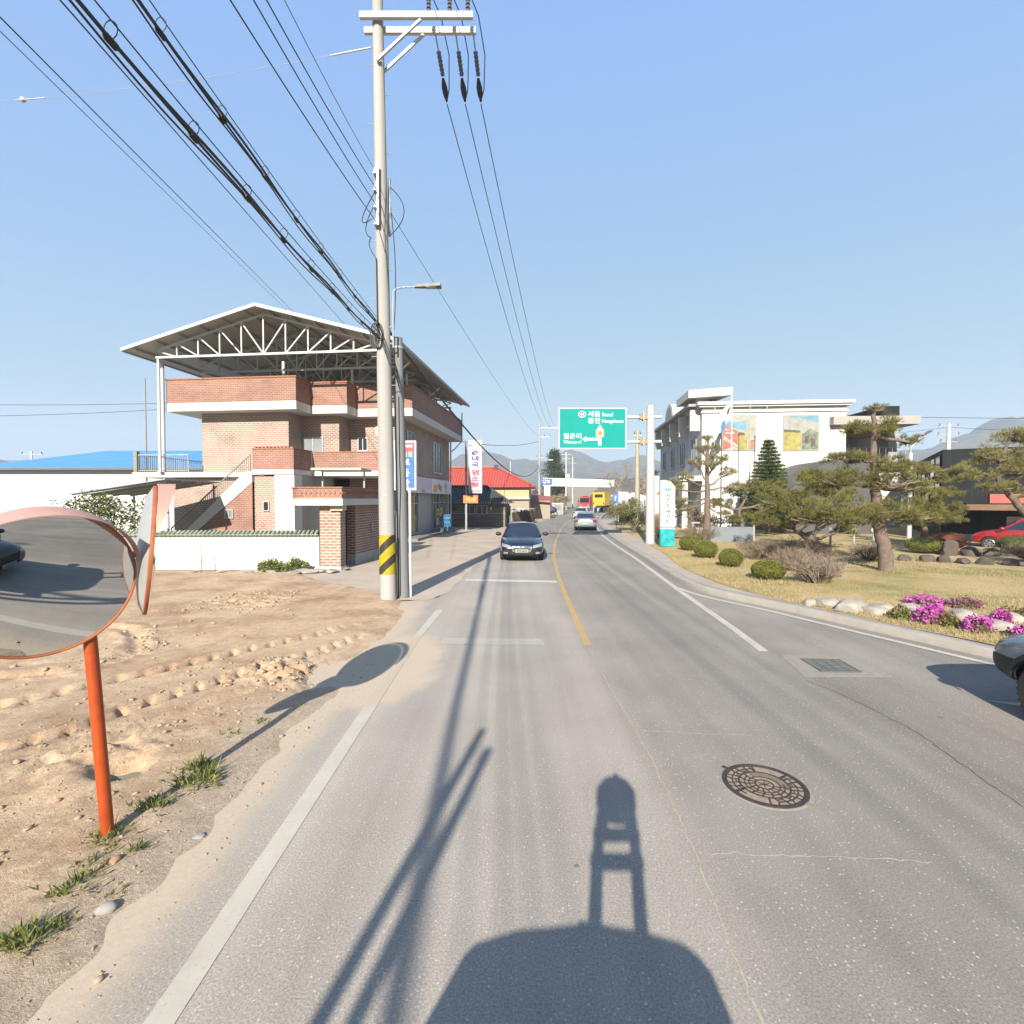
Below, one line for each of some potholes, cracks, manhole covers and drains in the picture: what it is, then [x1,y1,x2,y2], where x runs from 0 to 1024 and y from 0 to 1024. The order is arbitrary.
crack [808,681,1023,807]
drain grate [781,655,893,677]
manhole cover [719,764,815,811]
crack [706,851,930,864]
